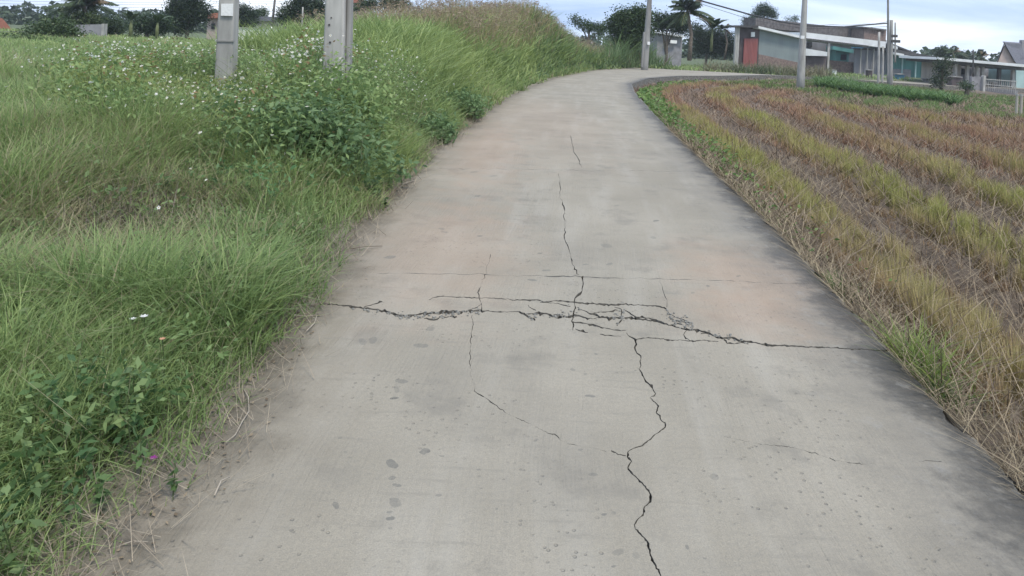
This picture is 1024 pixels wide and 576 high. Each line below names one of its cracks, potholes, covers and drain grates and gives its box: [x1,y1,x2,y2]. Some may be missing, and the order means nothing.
crack [319,254,889,576]
crack [558,174,579,275]
crack [727,437,941,465]
